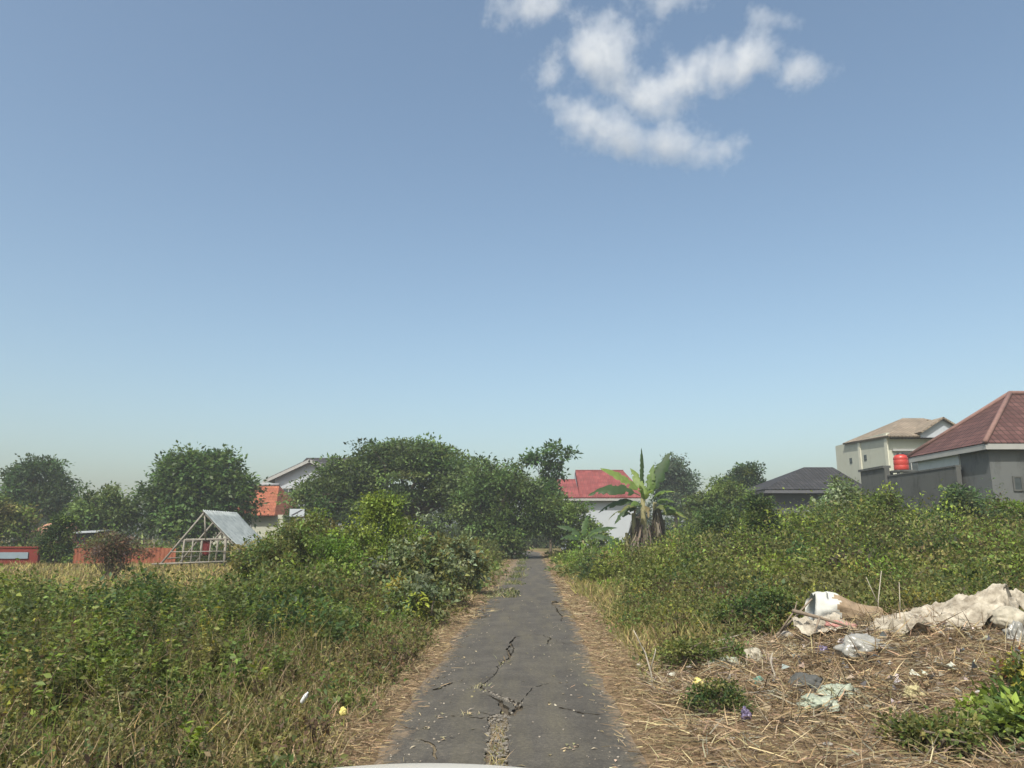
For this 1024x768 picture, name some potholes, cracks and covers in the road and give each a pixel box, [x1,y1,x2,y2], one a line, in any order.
crack [453,635,549,766]
crack [424,741,438,760]
